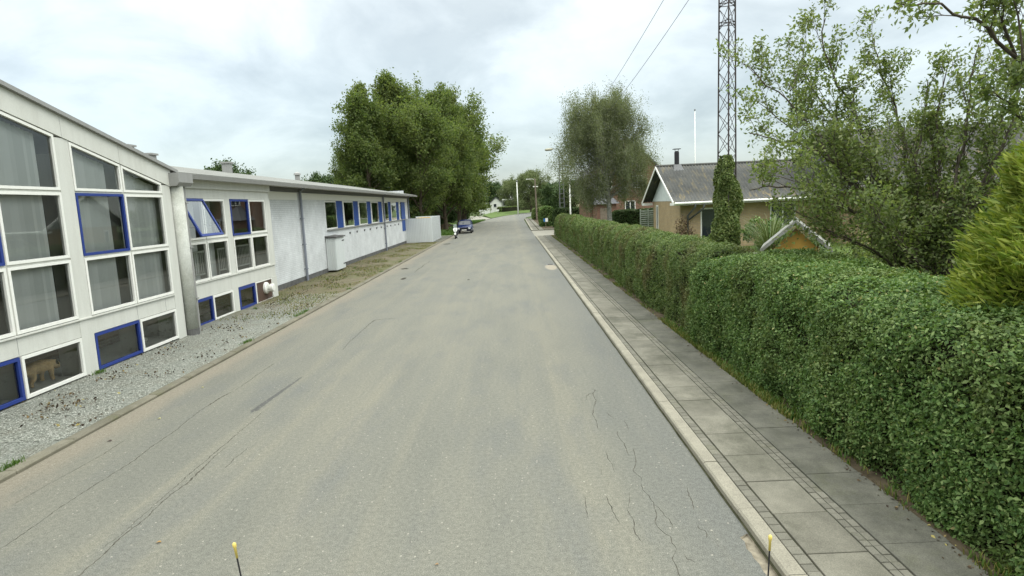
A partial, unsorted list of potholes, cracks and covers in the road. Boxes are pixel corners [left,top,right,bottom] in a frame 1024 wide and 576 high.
crack [7,364,273,545]
crack [79,413,261,576]
crack [585,432,694,576]
